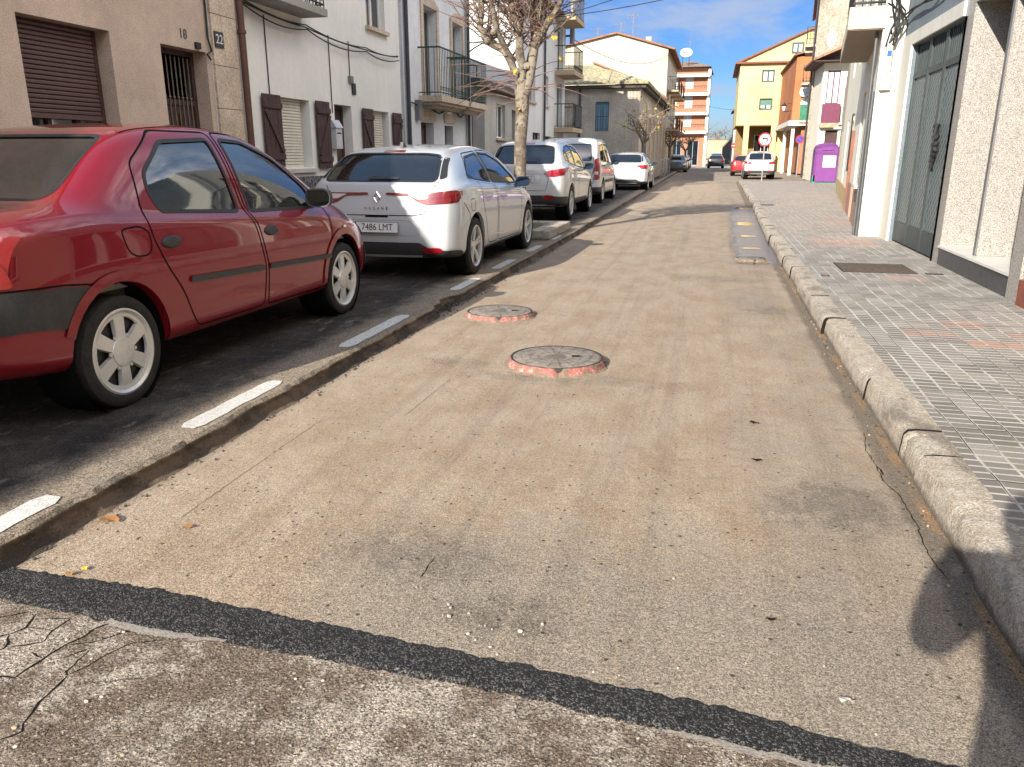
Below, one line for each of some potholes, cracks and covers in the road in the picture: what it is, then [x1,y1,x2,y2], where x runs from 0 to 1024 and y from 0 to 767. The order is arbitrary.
manhole cover [504,346,608,378]
crack [0,612,159,740]
crack [182,419,323,517]
crack [864,435,946,576]
manhole cover [463,305,537,323]
